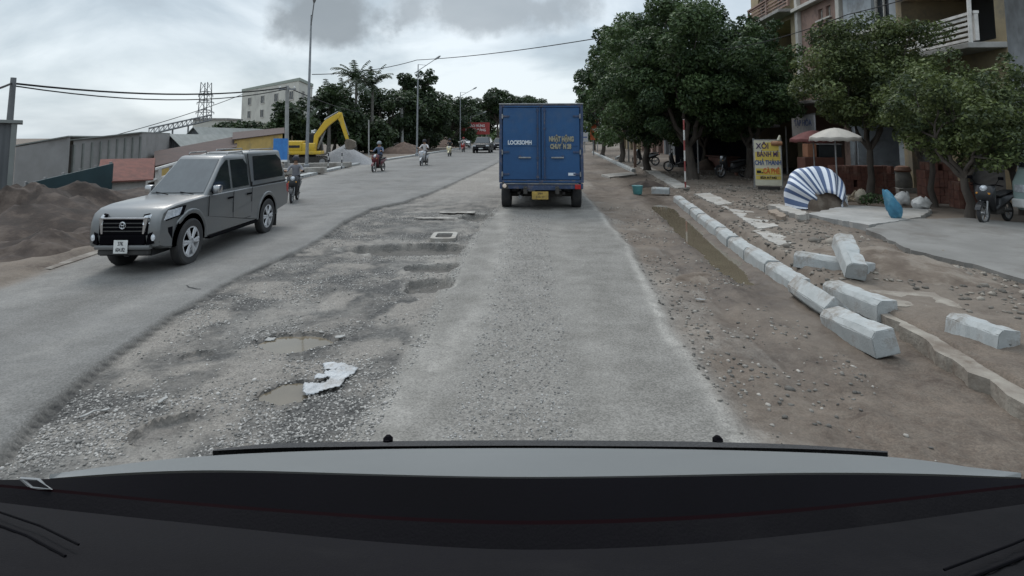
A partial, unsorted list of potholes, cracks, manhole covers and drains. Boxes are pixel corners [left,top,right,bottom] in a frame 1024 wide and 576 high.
pothole [121,412,197,447]
pothole [255,380,315,405]
pothole [340,242,475,257]
pothole [402,262,461,273]
pothole [251,331,337,354]
manhole cover [430,232,458,242]
pothole [402,275,458,294]
